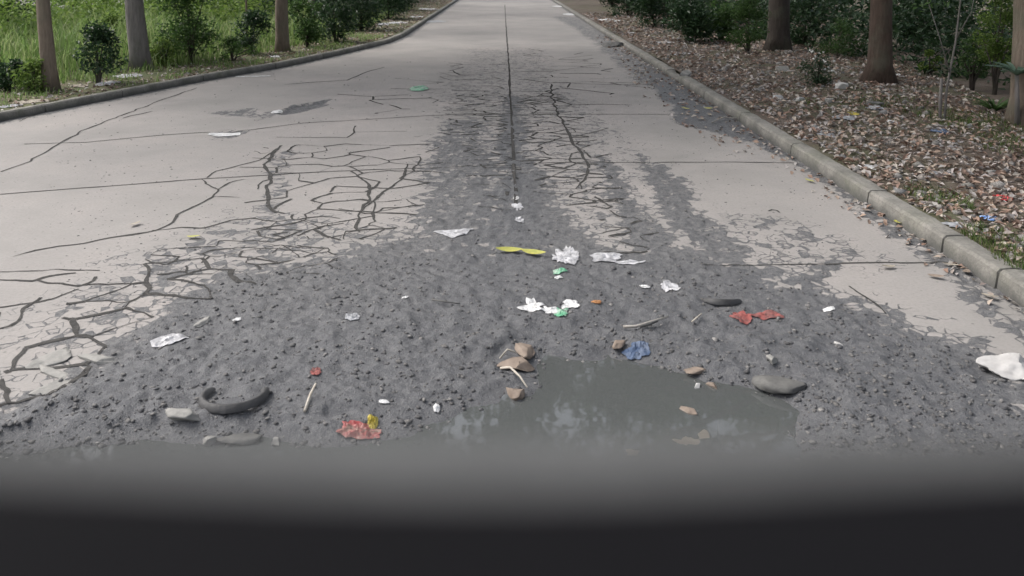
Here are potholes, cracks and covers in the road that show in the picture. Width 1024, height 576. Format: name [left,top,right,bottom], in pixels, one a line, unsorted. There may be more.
crack [0,126,448,406]
crack [284,49,659,253]
pothole [0,318,850,447]
crack [0,88,195,172]
